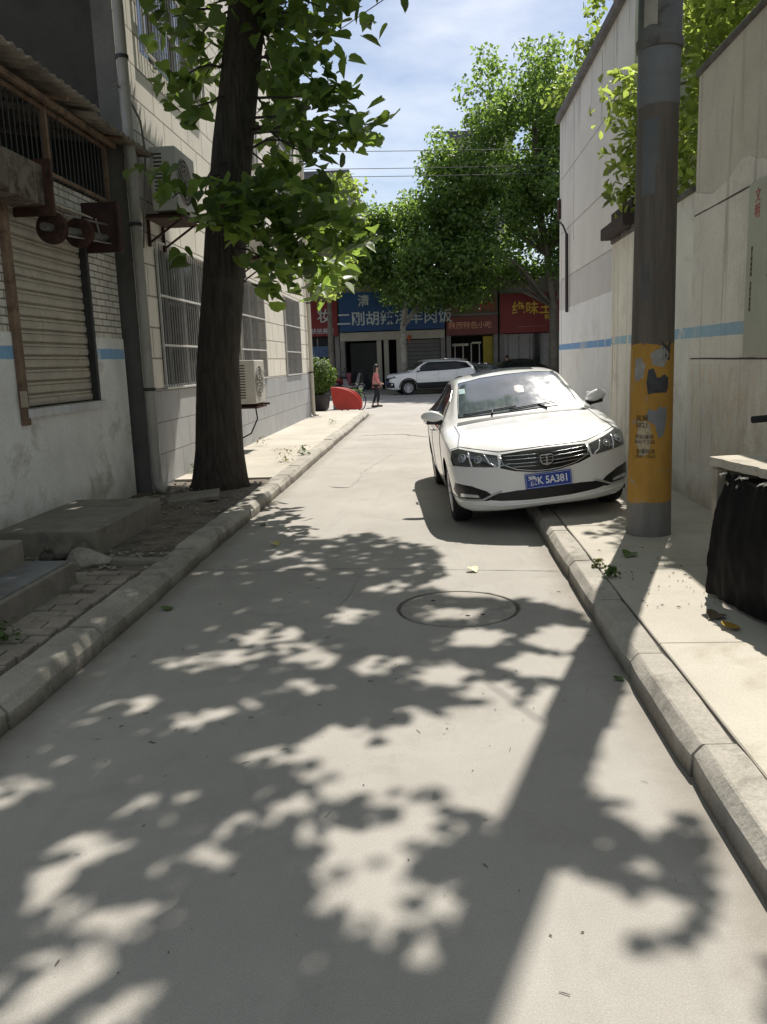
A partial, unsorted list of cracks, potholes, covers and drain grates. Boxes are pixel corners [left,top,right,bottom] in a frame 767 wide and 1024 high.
manhole cover [396,591,521,627]
